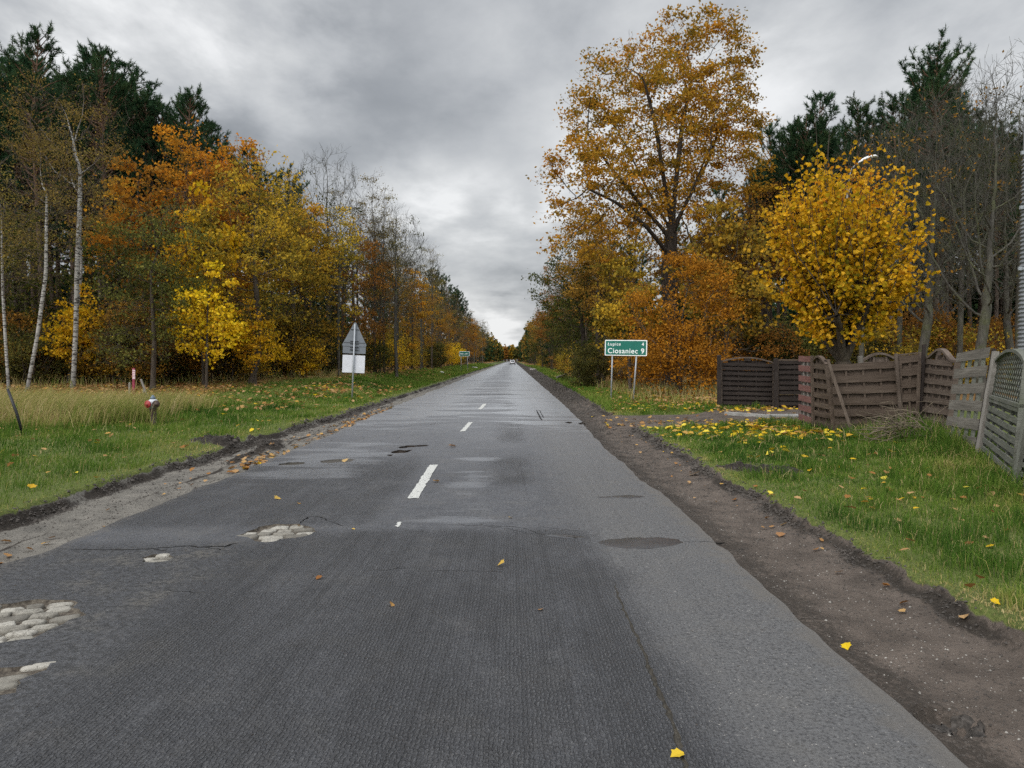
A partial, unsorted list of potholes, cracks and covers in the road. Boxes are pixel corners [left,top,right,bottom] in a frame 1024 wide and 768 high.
pothole [0,661,56,695]
pothole [142,553,173,562]
pothole [0,599,86,643]
crack [71,542,248,551]
pothole [237,524,316,542]
